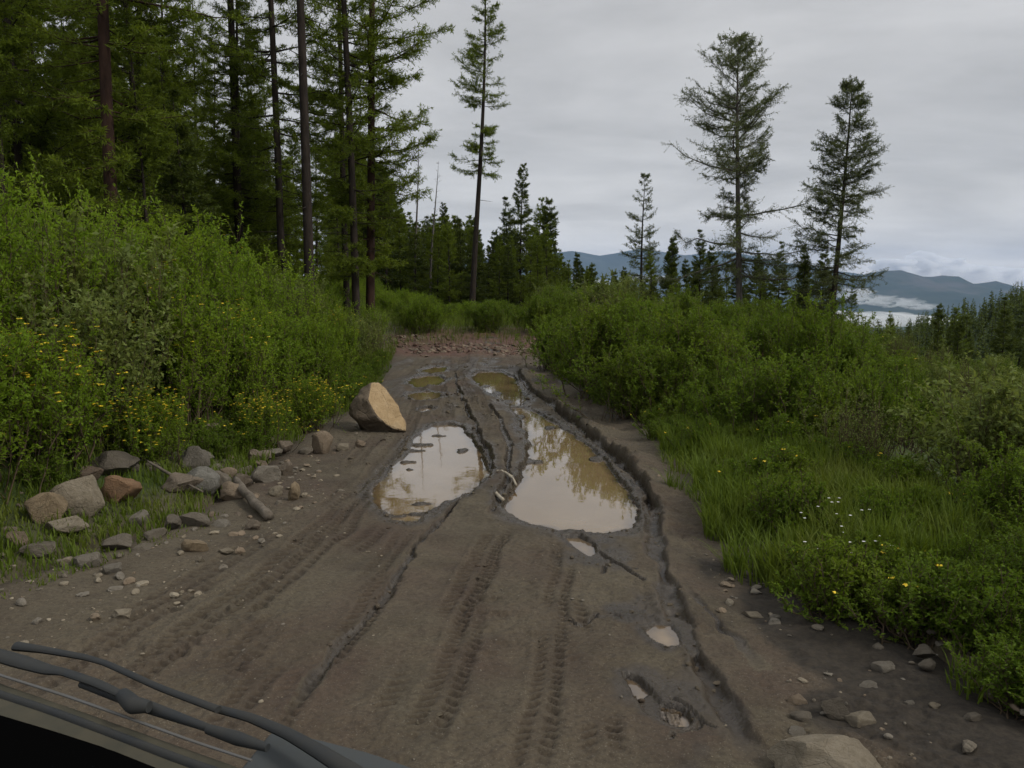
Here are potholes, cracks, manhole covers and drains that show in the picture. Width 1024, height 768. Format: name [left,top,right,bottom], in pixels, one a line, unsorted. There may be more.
pothole [404,389,443,400]
pothole [637,616,686,649]
pothole [616,668,684,727]
pothole [559,531,601,557]
pothole [498,405,643,534]
pothole [367,421,492,522]
pothole [406,373,447,388]
pothole [469,369,530,407]
pothole [652,697,697,729]
